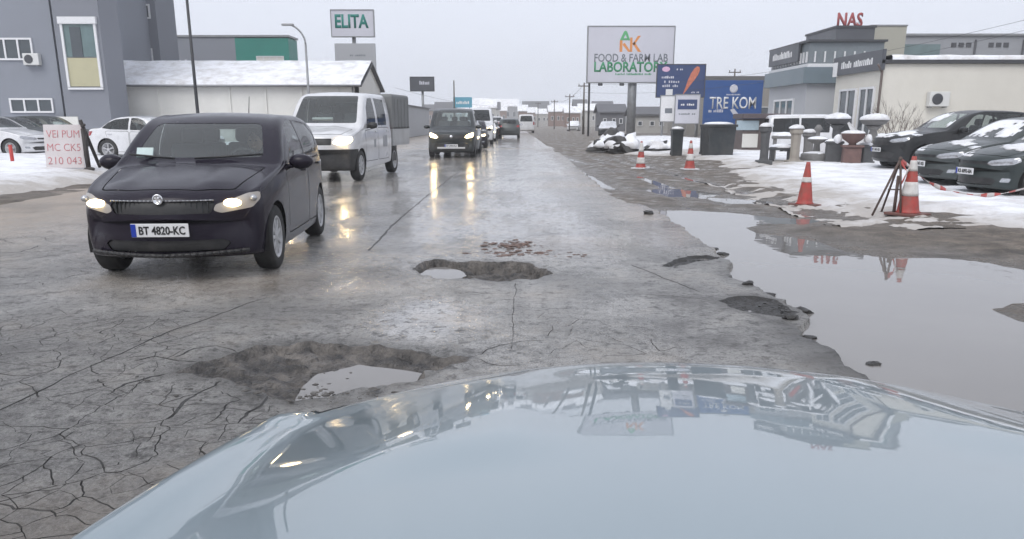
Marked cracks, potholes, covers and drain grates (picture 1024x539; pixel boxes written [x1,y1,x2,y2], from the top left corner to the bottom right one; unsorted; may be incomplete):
pothole [719,296,799,317]
crack [632,265,711,301]
crack [475,283,679,366]
pothole [663,255,720,268]
crack [0,297,279,539]
pothole [175,341,474,400]
pothole [413,259,553,282]
